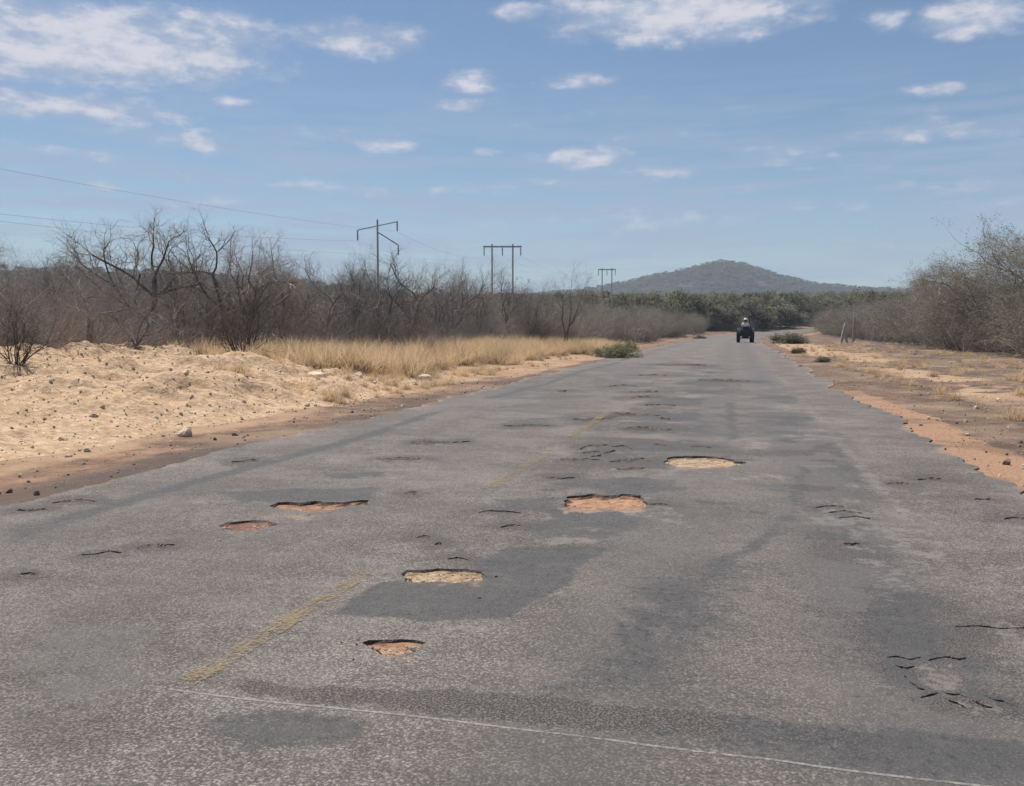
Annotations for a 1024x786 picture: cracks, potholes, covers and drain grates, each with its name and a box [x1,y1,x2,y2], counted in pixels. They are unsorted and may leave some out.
crack [887,656,1014,709]
